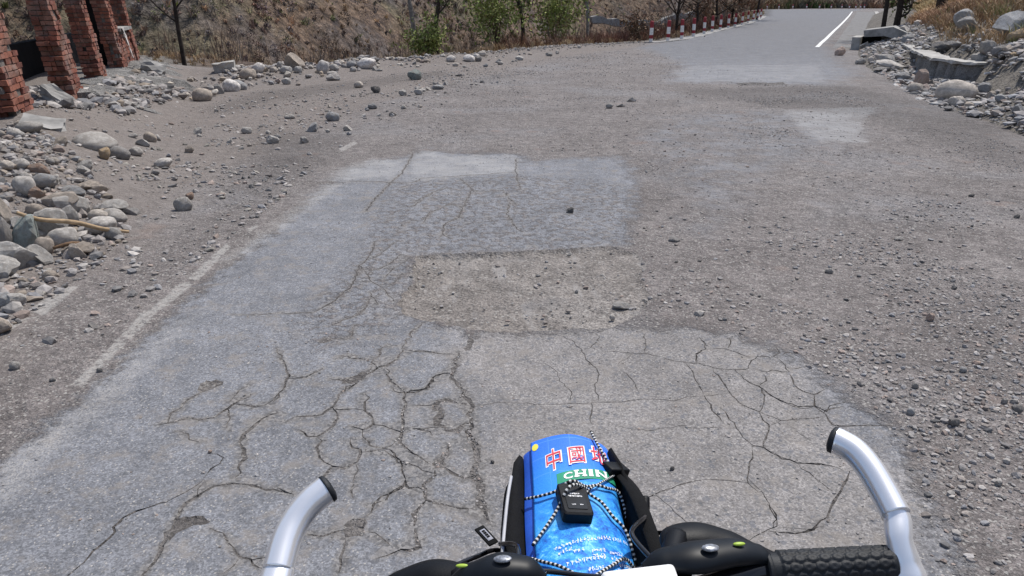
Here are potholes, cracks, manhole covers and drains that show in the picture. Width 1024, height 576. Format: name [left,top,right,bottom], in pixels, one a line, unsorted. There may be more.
crack [485,333,883,540]
crack [366,154,521,237]
crack [67,242,490,576]
